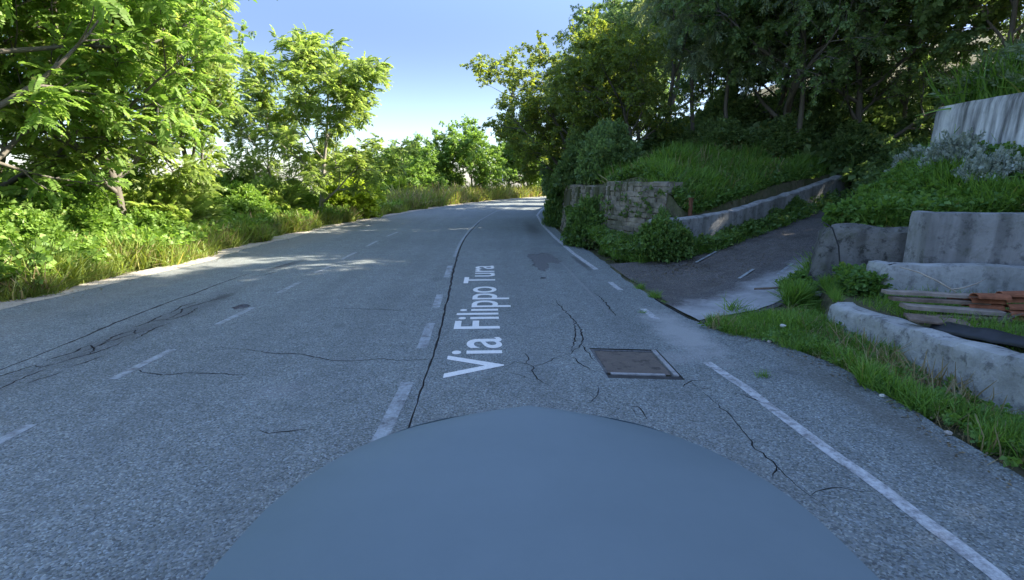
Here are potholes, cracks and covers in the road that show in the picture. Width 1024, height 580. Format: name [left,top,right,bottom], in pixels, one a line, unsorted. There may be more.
crack [507,299,599,403]
manhole cover [590,349,684,380]
crack [0,262,293,389]
crack [219,347,443,361]
crack [683,380,875,506]
